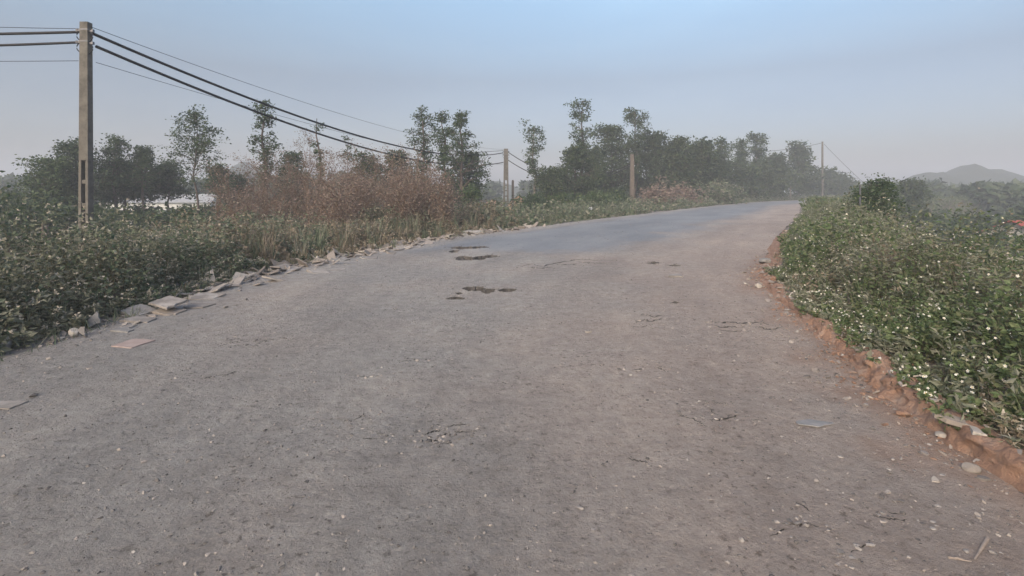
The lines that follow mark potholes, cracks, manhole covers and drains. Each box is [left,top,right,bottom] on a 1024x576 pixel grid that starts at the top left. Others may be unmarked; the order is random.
crack [678,402,737,427]
crack [715,322,778,332]
pothole [463,286,495,294]
